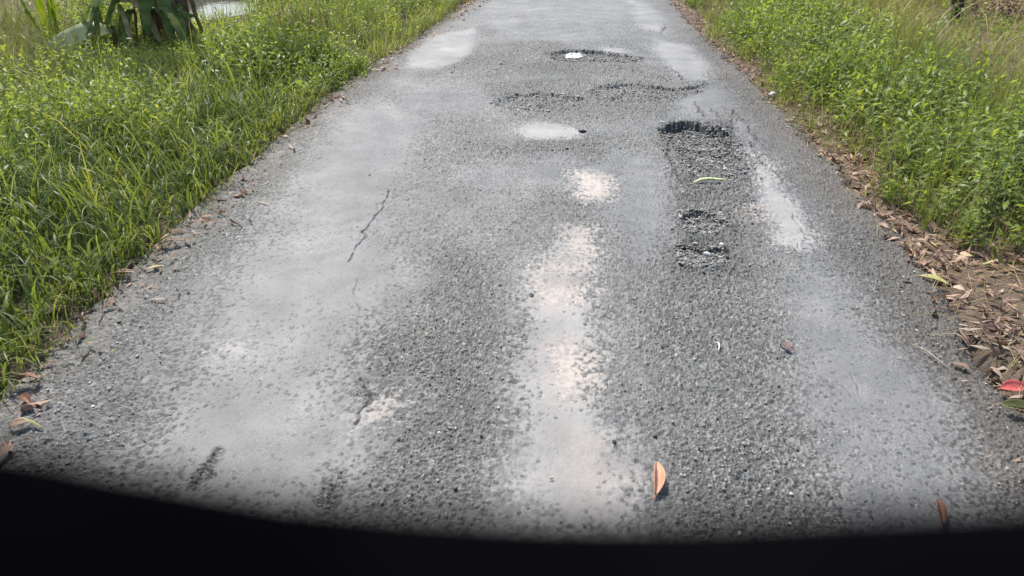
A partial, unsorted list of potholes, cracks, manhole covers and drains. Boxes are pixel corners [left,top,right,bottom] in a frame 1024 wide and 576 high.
crack [347,189,393,427]
pothole [587,82,711,104]
pothole [678,208,732,240]
pothole [666,238,737,270]
pothole [657,120,746,179]
pothole [542,49,654,64]
pothole [488,91,594,115]
